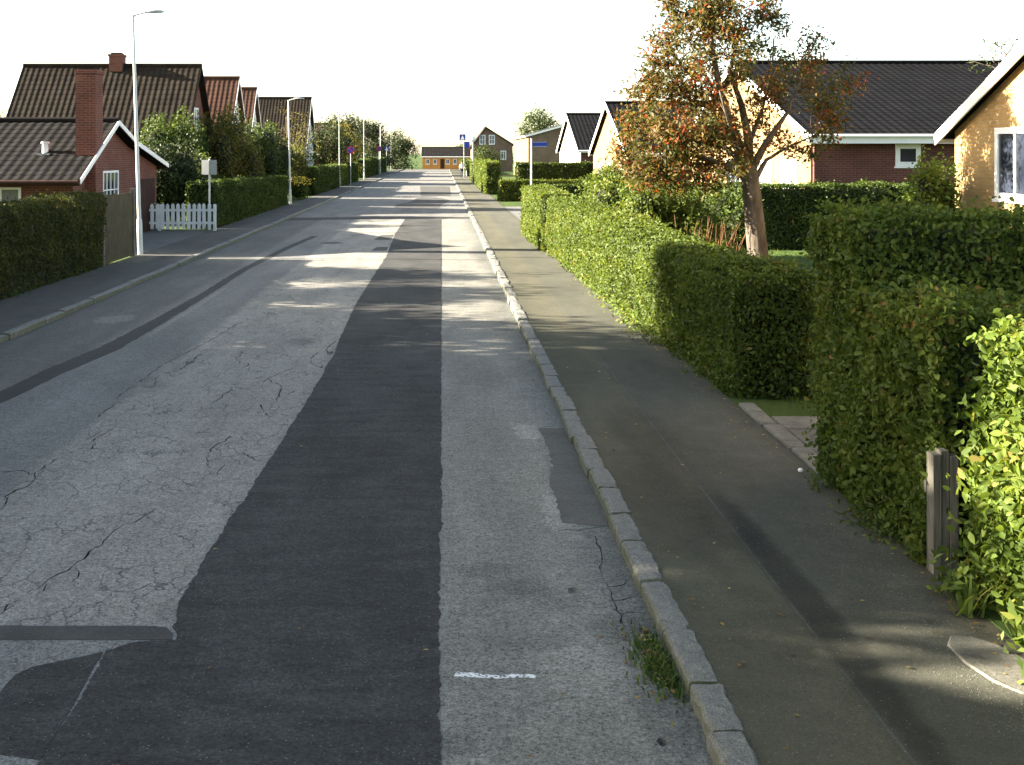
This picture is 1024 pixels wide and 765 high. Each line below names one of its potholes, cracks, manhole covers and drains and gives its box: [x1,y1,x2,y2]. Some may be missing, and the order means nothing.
crack [560,522,635,628]
crack [236,333,338,417]
crack [1,509,155,614]
crack [206,436,262,474]
crack [0,459,56,510]
